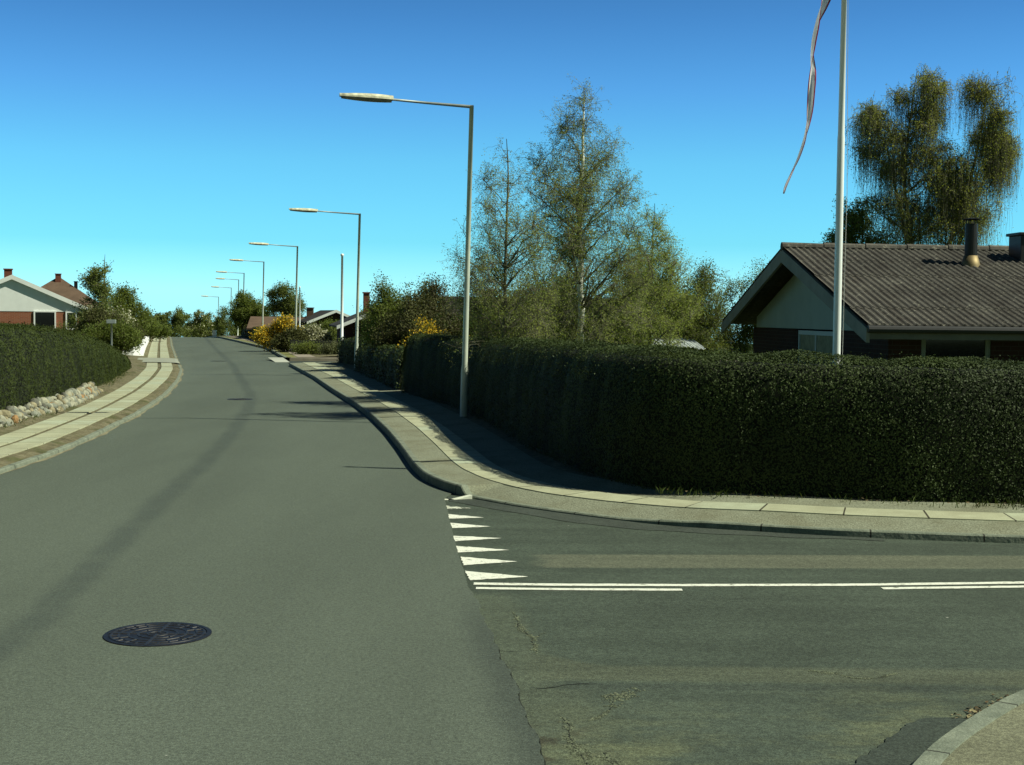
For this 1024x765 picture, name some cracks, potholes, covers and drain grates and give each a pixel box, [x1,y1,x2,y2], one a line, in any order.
crack [494,611,645,765]
manhole cover [103,622,212,647]
